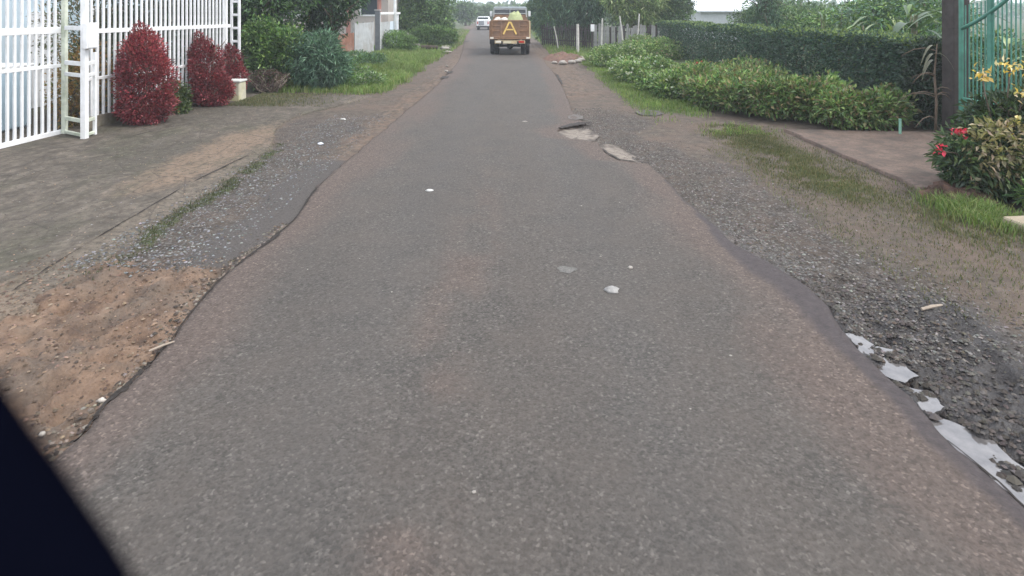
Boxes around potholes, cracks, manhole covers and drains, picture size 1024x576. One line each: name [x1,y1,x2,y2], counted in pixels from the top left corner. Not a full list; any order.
pothole [558,122,599,141]
pothole [600,144,649,163]
